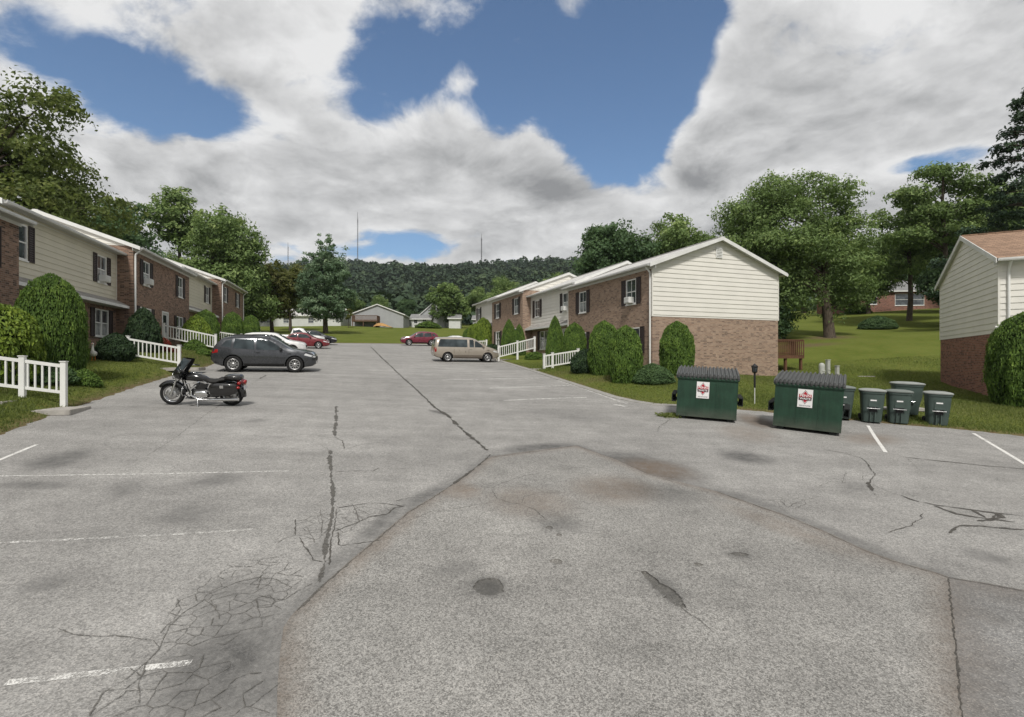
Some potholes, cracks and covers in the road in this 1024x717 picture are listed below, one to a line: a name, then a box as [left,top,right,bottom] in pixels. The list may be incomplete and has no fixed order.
crack [763,449,1024,533]
pothole [639,570,688,609]
pothole [471,577,507,597]
crack [59,557,312,717]
crack [280,468,569,562]
